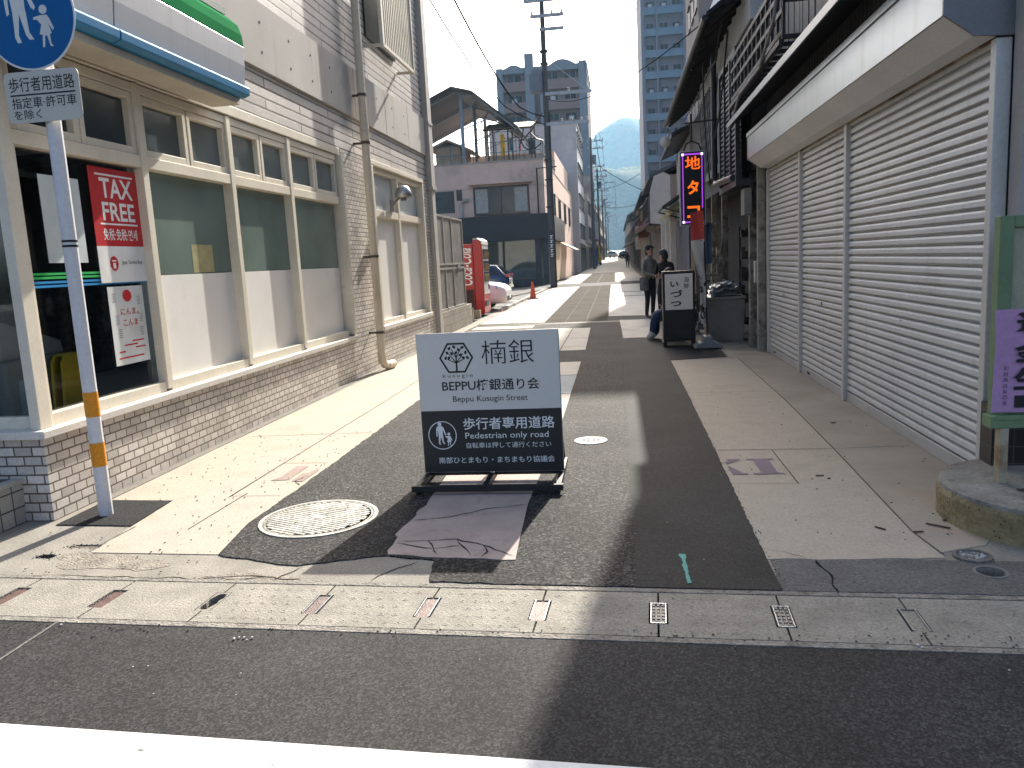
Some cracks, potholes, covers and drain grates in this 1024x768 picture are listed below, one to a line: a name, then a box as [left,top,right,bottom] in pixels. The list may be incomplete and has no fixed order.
drain grate [650,602,667,631]
drain grate [414,597,441,620]
drain grate [772,605,796,631]
manhole cover [574,436,607,445]
drain grate [529,600,551,624]
manhole cover [258,500,378,538]
crack [774,550,839,593]
drain grate [92,591,125,608]
drain grate [898,609,931,634]
manhole cover [952,548,993,563]
drain grate [302,594,333,615]
